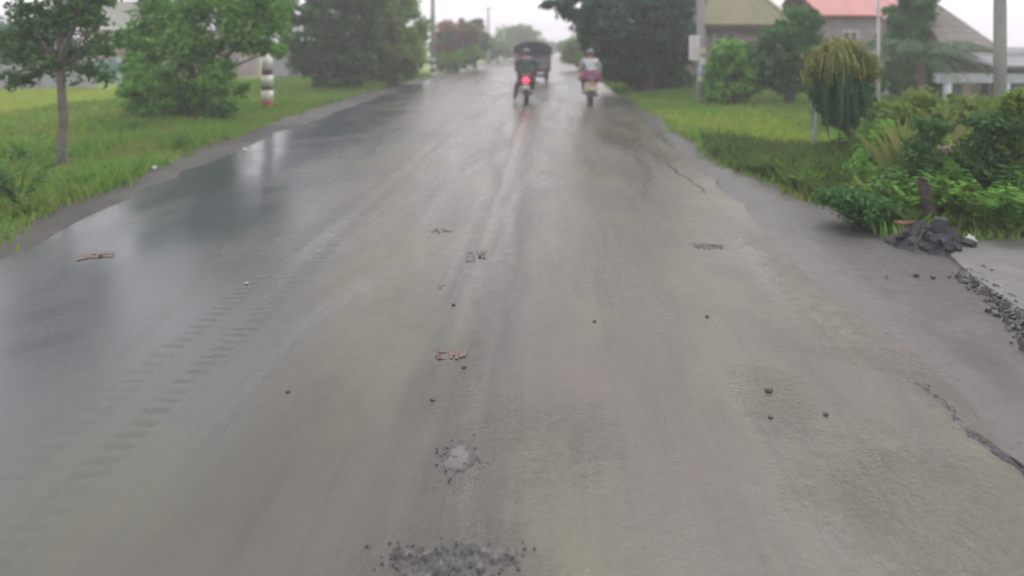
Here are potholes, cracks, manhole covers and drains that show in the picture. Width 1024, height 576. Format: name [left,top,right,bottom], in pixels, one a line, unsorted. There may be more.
pothole [689,242,725,250]
crack [908,377,1024,476]
crack [639,143,705,193]
pothole [365,537,536,576]
pothole [434,434,489,482]
